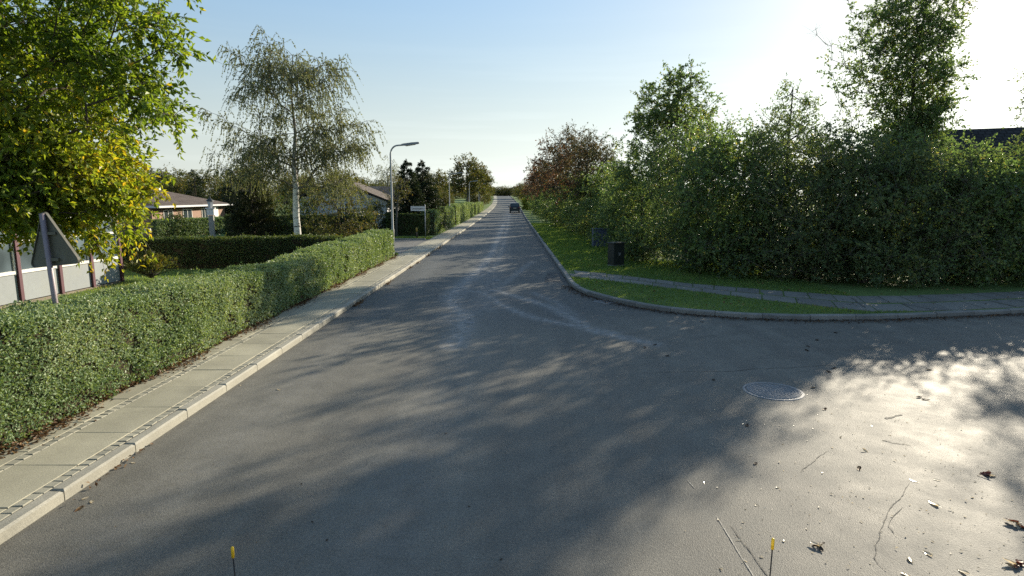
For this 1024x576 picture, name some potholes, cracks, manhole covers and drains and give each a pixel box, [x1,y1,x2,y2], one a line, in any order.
manhole cover [742,382,805,401]
crack [874,484,909,564]
